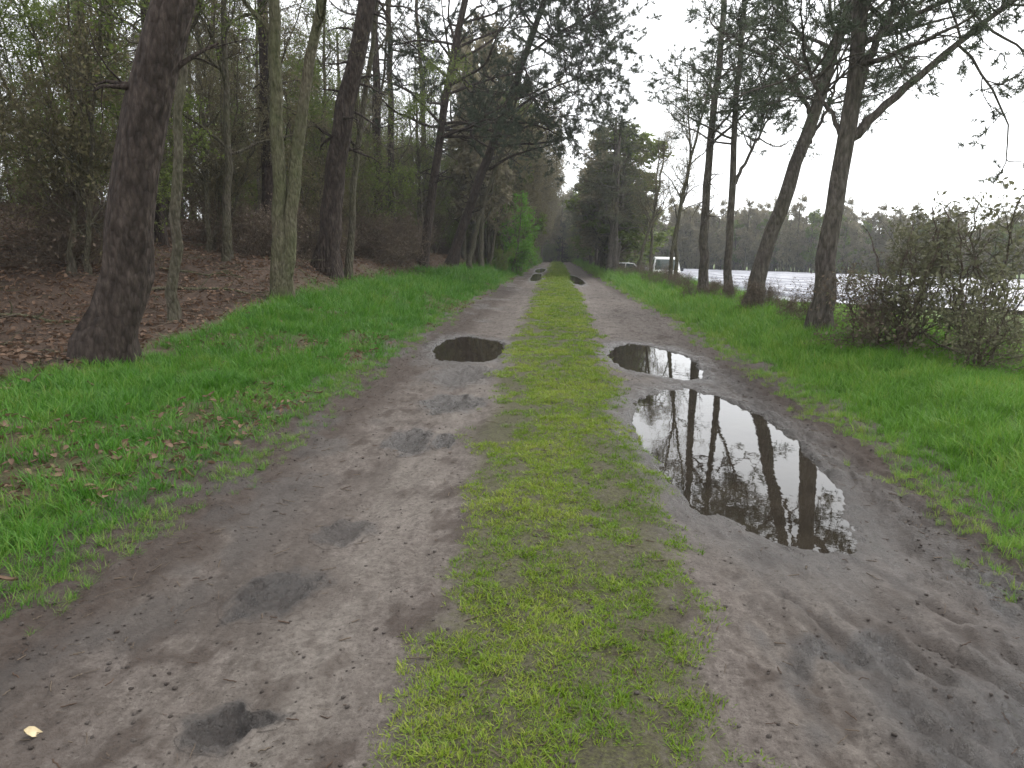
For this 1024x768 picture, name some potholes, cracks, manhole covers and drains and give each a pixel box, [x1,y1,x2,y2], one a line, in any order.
pothole [595,340,724,388]
pothole [568,275,588,287]
pothole [430,431,459,452]
pothole [379,425,438,458]
pothole [174,699,292,758]
pothole [606,379,926,616]
pothole [528,273,544,283]
pothole [419,332,515,370]
pothole [418,393,487,415]
pothole [217,568,328,626]
